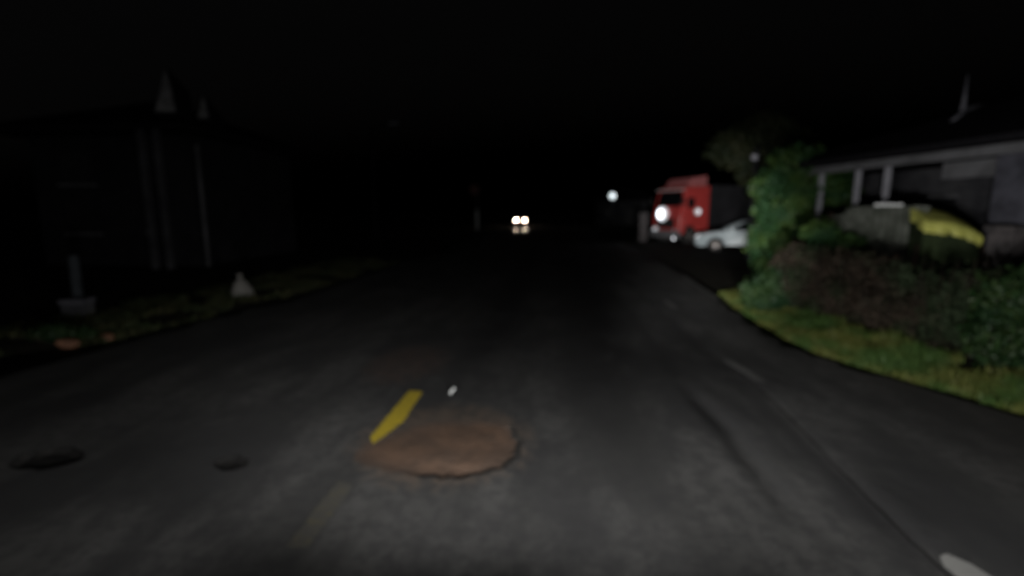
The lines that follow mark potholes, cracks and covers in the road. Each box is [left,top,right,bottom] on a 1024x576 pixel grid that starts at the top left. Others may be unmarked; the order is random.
pothole [213,455,250,471]
pothole [8,447,85,470]
